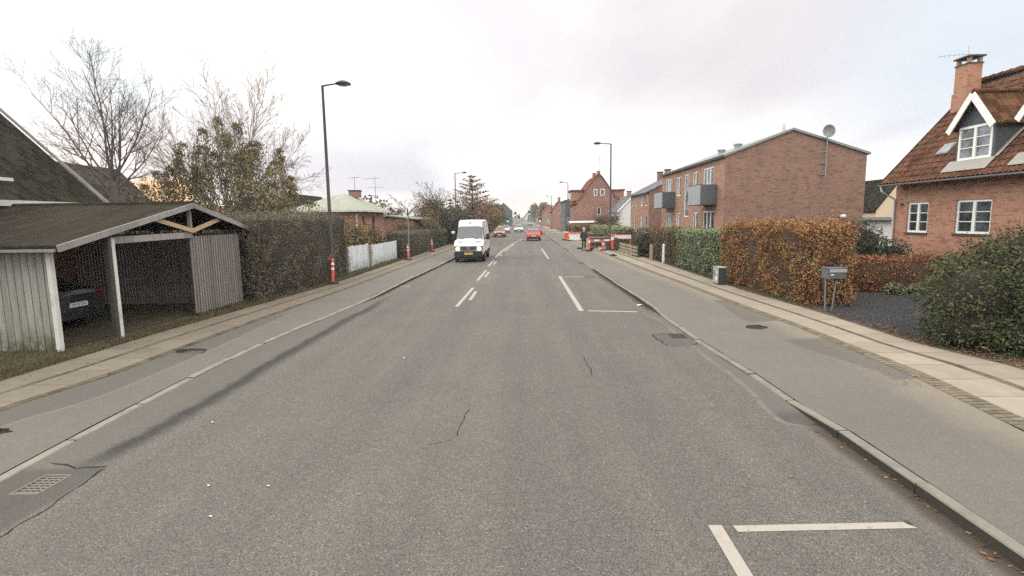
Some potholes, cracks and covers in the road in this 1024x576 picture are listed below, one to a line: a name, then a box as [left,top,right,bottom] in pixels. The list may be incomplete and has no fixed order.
drain grate [8,474,72,495]
